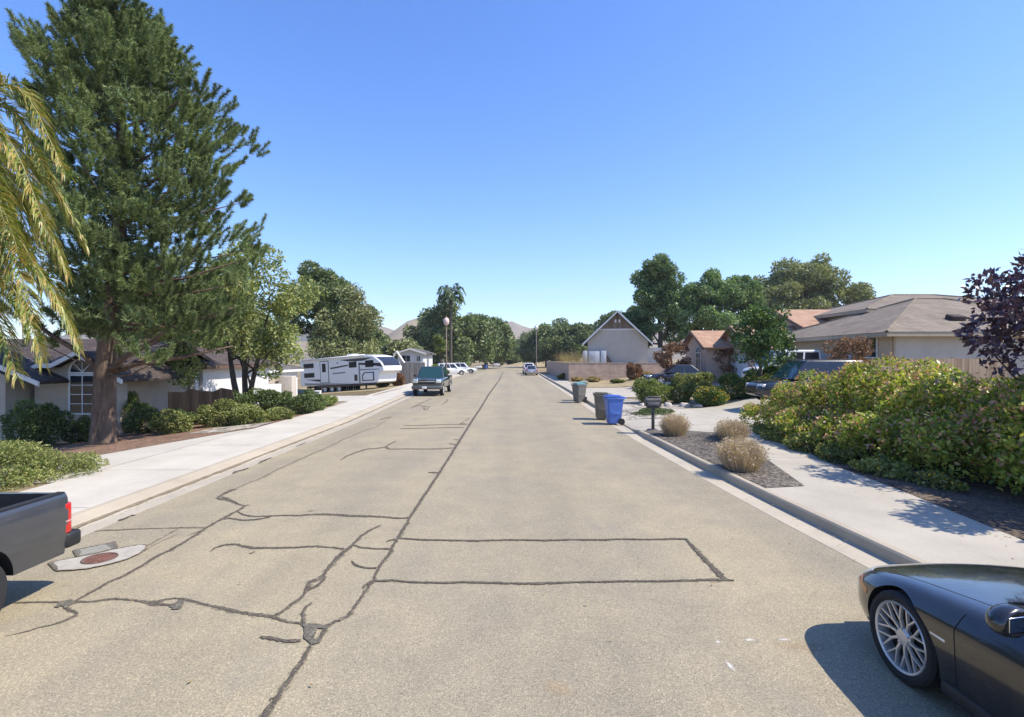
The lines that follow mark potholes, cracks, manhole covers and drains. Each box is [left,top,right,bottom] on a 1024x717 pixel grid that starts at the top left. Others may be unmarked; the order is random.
manhole cover [80,552,119,564]
crack [233,399,469,489]
crack [98,515,206,551]
